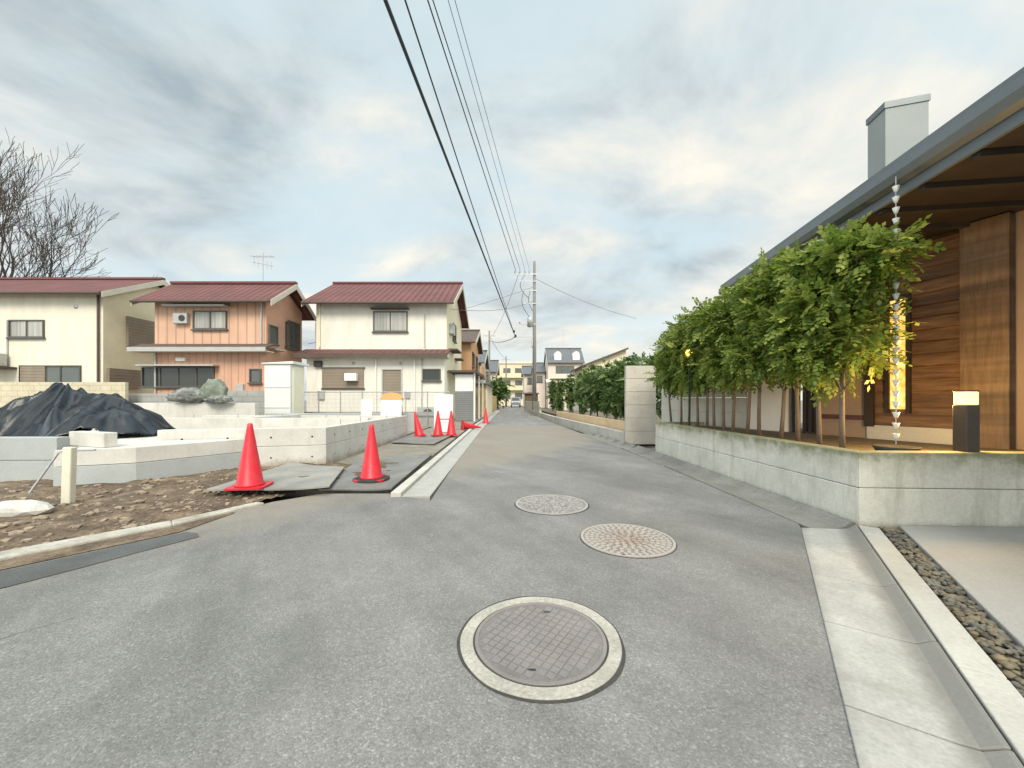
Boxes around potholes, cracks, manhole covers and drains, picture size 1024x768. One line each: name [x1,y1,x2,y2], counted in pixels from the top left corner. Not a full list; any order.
manhole cover [580,524,677,559]
manhole cover [514,495,589,515]
manhole cover [457,596,626,704]
